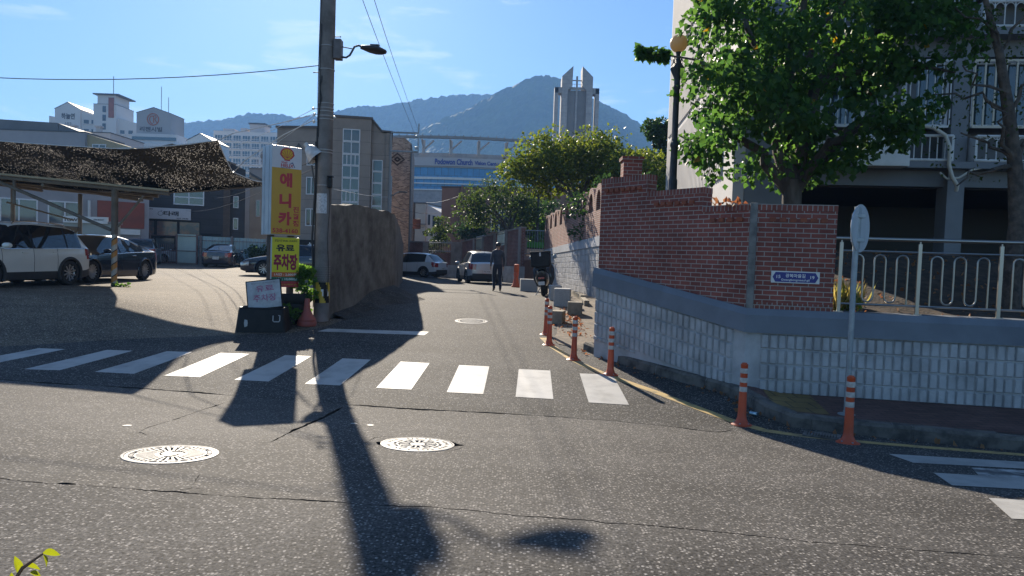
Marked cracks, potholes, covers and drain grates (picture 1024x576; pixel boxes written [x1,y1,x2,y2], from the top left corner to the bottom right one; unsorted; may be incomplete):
crack [266,405,741,443]
manhole cover [120,445,219,464]
crack [0,477,1019,558]
manhole cover [380,437,454,452]
